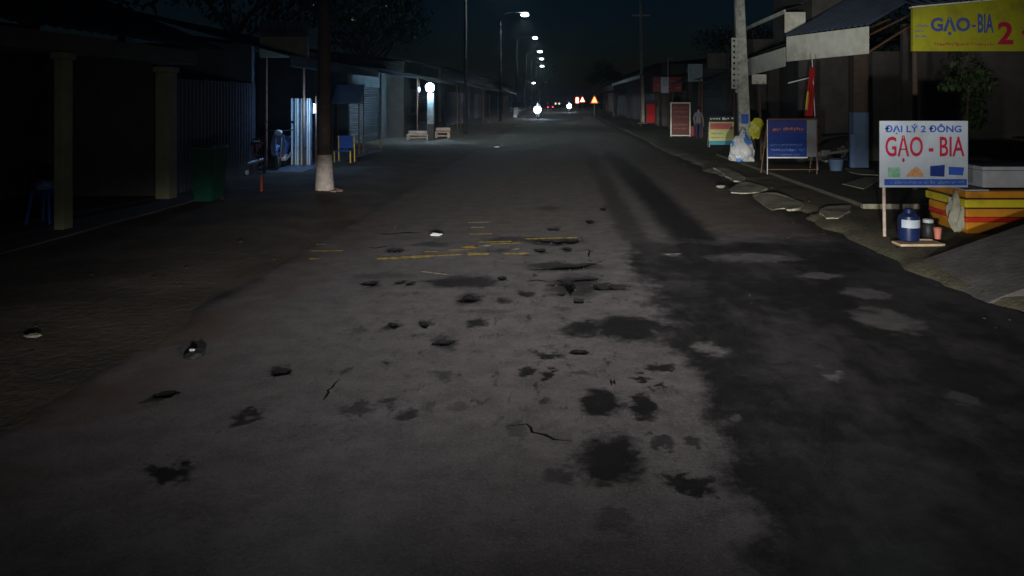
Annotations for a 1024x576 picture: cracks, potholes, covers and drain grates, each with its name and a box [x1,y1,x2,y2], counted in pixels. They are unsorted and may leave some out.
pothole [551,276,603,296]
pothole [591,282,631,292]
pothole [528,261,602,271]
pothole [457,294,480,303]
crack [510,423,571,441]
